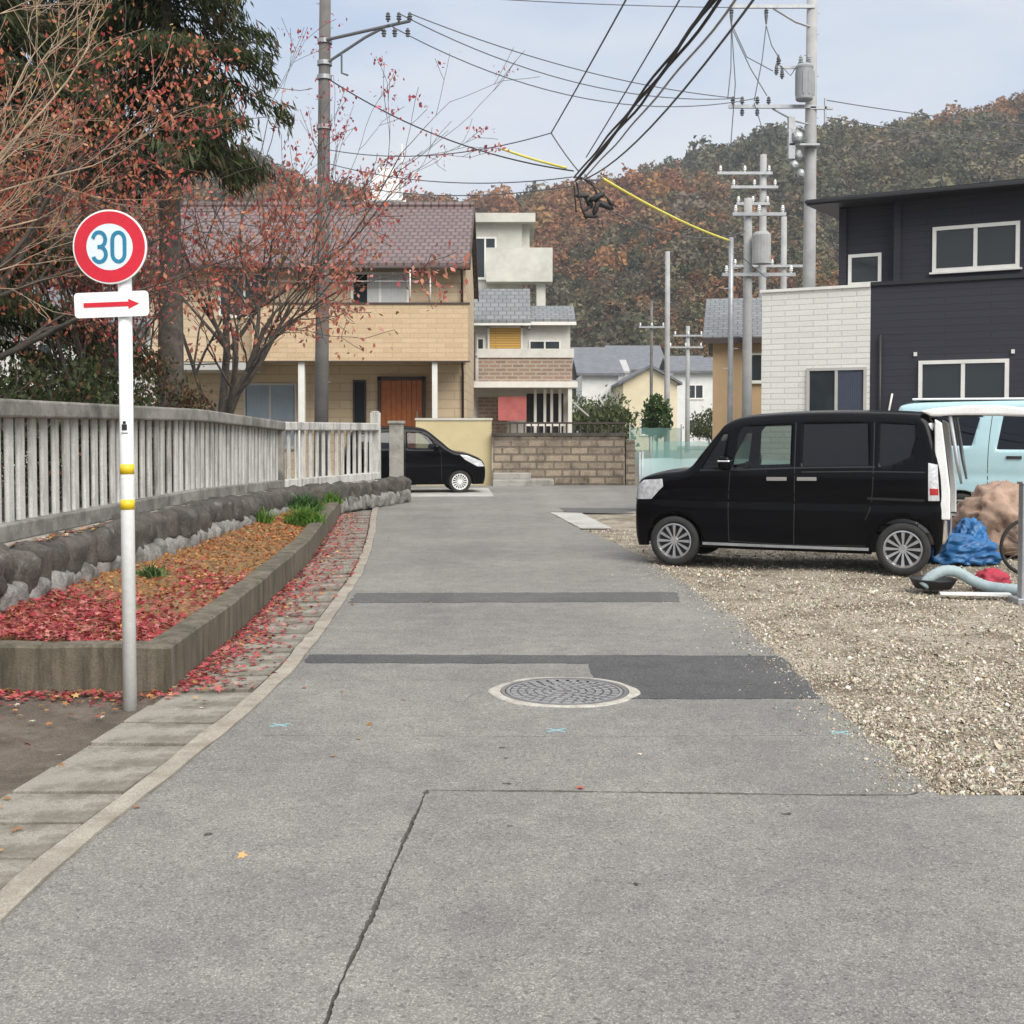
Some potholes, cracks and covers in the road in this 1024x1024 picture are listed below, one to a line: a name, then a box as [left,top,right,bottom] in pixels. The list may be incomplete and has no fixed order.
manhole cover [488,677,641,708]
